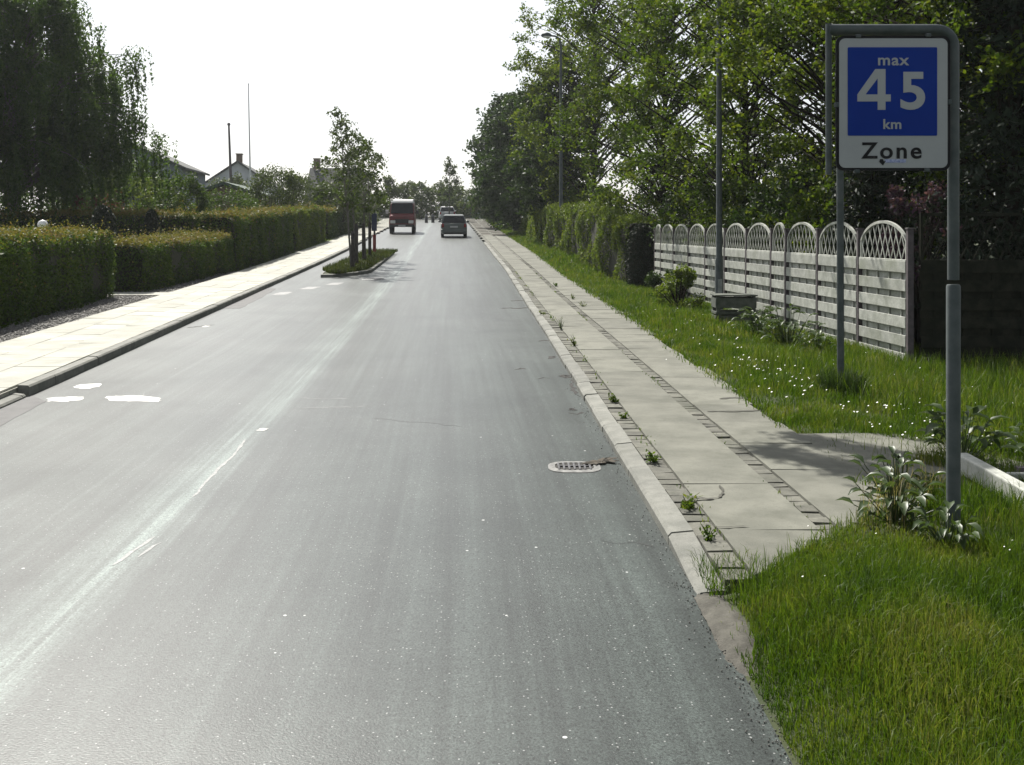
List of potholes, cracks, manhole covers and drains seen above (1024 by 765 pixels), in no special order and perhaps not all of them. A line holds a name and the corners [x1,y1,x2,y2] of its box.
crack [688,485,724,500]
